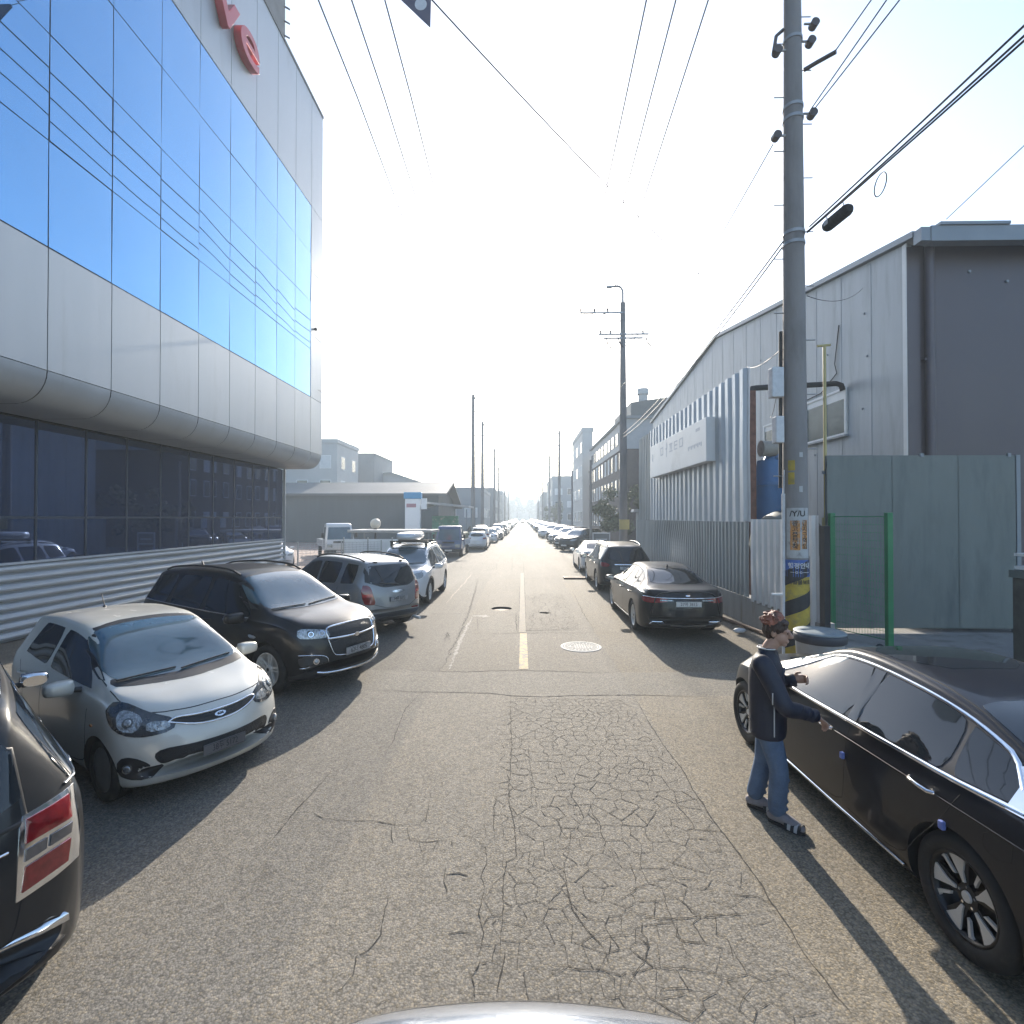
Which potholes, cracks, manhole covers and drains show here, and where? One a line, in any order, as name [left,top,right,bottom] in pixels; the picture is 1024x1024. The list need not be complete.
crack [443,867,468,899]
manhole cover [560,641,602,652]
crack [328,900,388,996]
